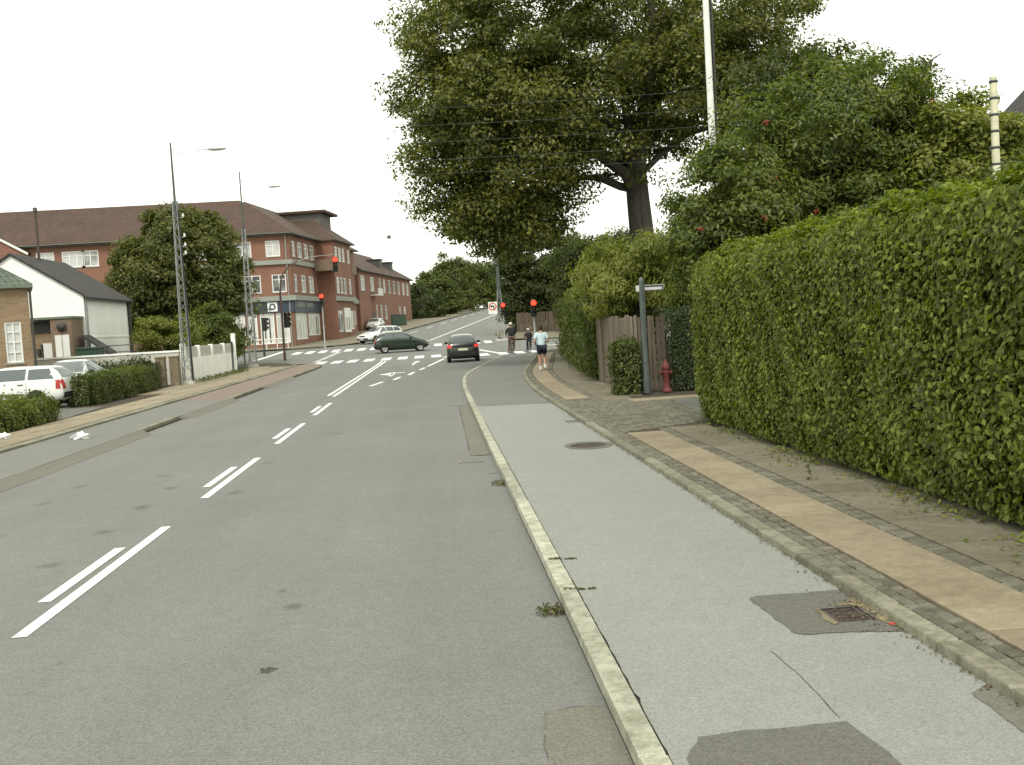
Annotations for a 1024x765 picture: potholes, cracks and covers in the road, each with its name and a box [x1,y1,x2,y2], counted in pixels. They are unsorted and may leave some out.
drain grate [822,607,875,623]
crack [773,652,840,718]
